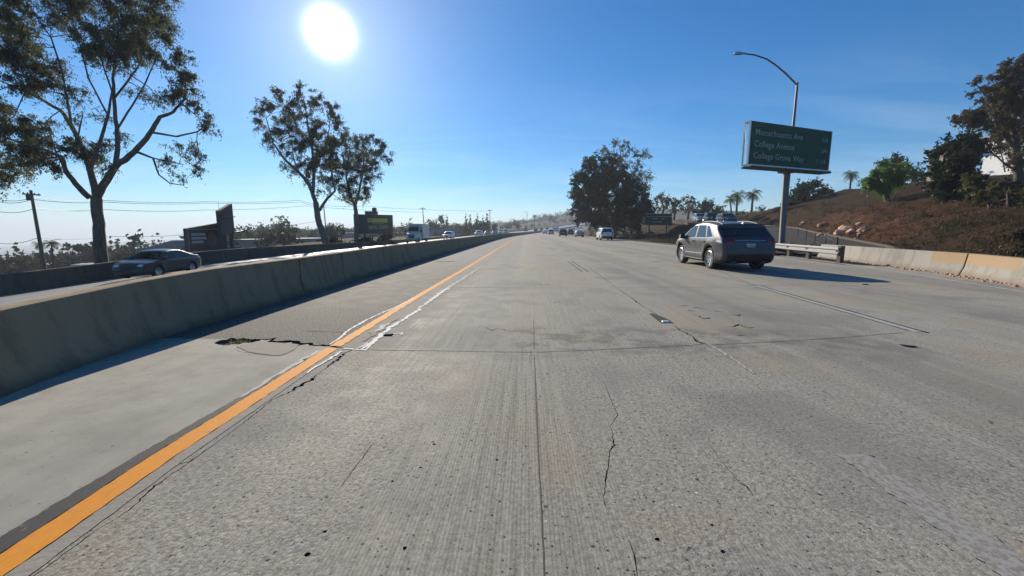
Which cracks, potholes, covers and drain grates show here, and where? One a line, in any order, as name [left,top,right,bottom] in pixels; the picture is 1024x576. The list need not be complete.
crack [603,382,638,576]
crack [613,285,754,344]
crack [34,350,352,576]
